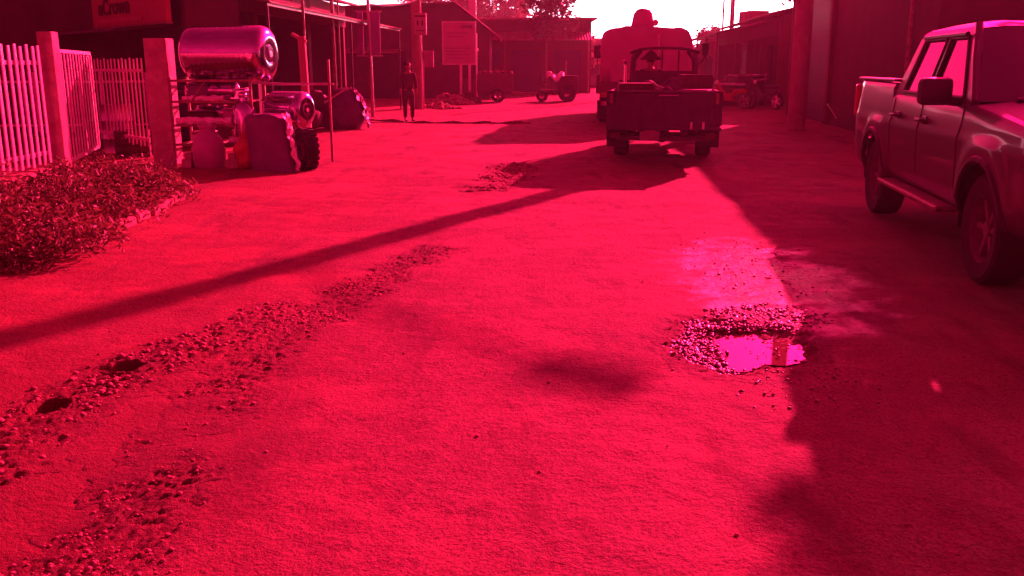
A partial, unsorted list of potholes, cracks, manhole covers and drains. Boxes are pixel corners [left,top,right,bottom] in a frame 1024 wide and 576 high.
pothole [90,358,159,378]
pothole [639,312,836,386]
pothole [23,396,77,419]
